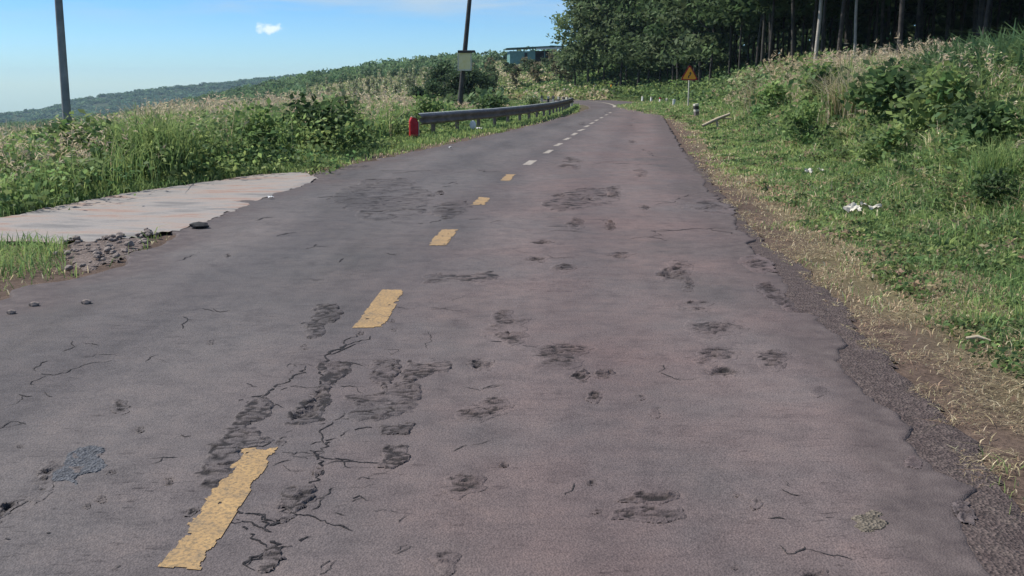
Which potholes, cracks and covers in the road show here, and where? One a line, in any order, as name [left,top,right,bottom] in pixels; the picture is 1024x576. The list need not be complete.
crack [14,341,111,404]
pothole [0,501,19,523]
crack [182,303,500,574]
